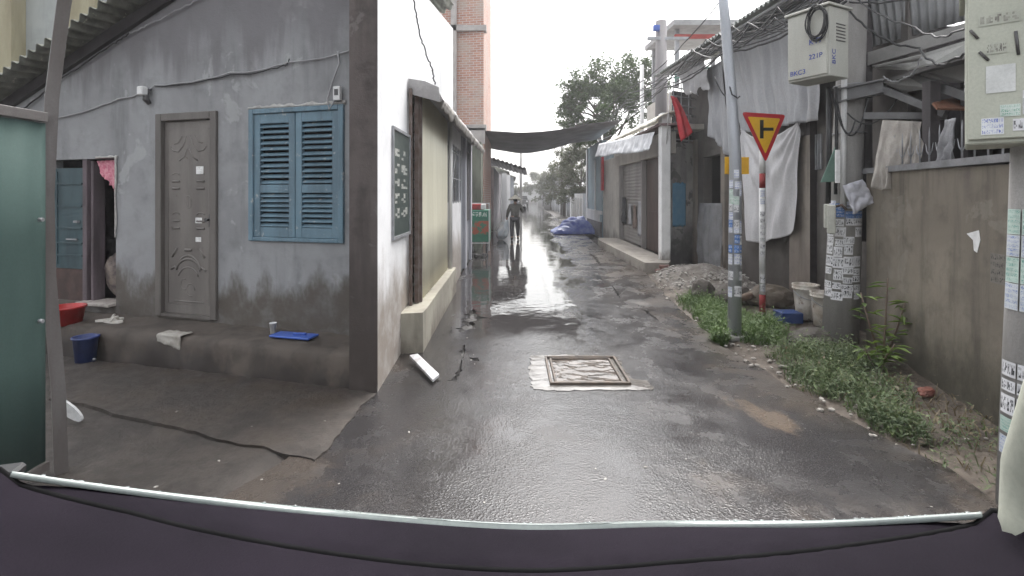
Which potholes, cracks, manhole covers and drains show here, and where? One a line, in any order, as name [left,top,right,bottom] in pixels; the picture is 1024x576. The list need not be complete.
crack [451,310,485,381]
manhole cover [528,354,654,391]
